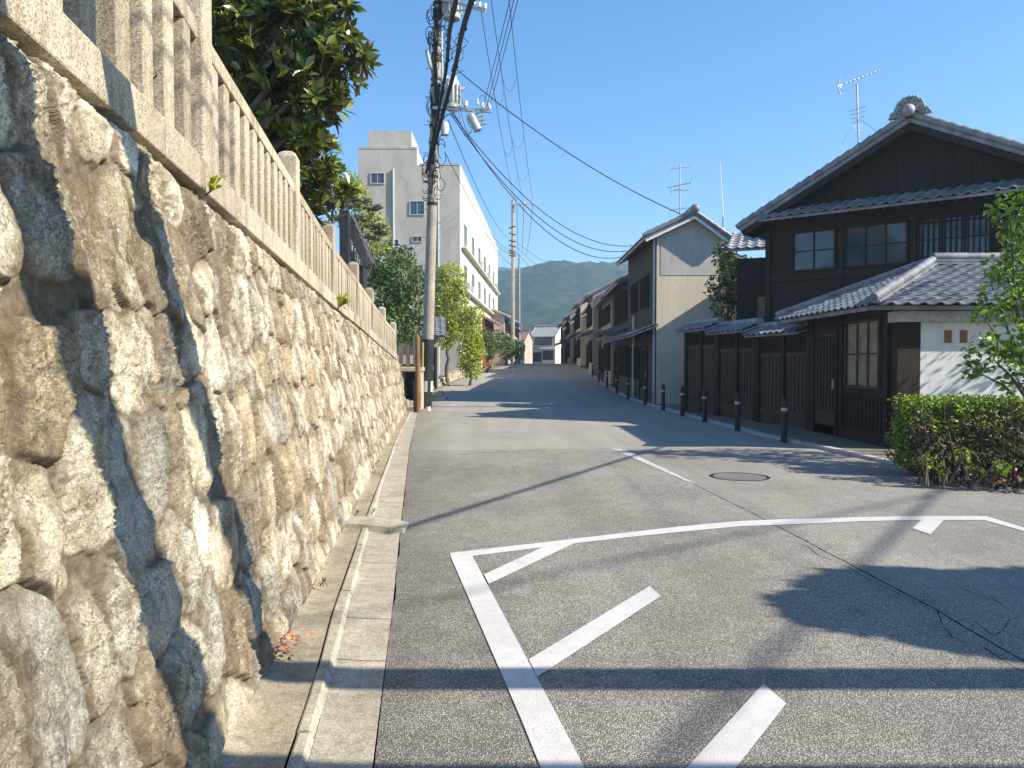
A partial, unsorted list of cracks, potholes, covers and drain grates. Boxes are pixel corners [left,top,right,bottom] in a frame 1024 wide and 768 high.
manhole cover [709,472,770,481]
crack [696,485,1024,672]
